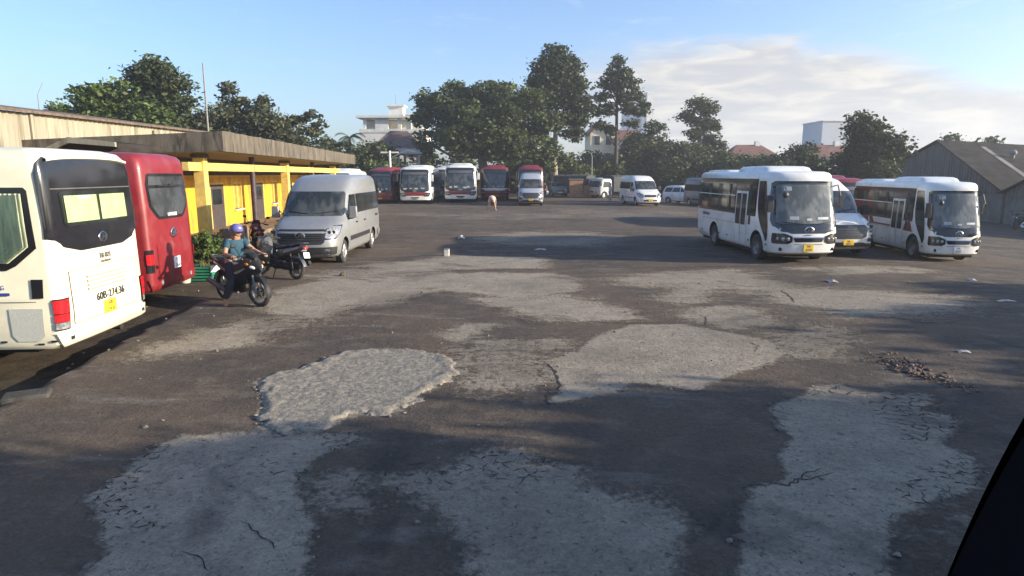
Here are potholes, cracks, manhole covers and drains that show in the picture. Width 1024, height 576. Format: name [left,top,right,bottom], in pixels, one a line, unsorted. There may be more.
crack [240,520,276,551]
crack [87,444,171,531]
crack [813,383,958,441]
crack [544,361,562,406]
crack [353,451,568,492]
crack [742,468,833,488]
crack [896,457,985,505]
